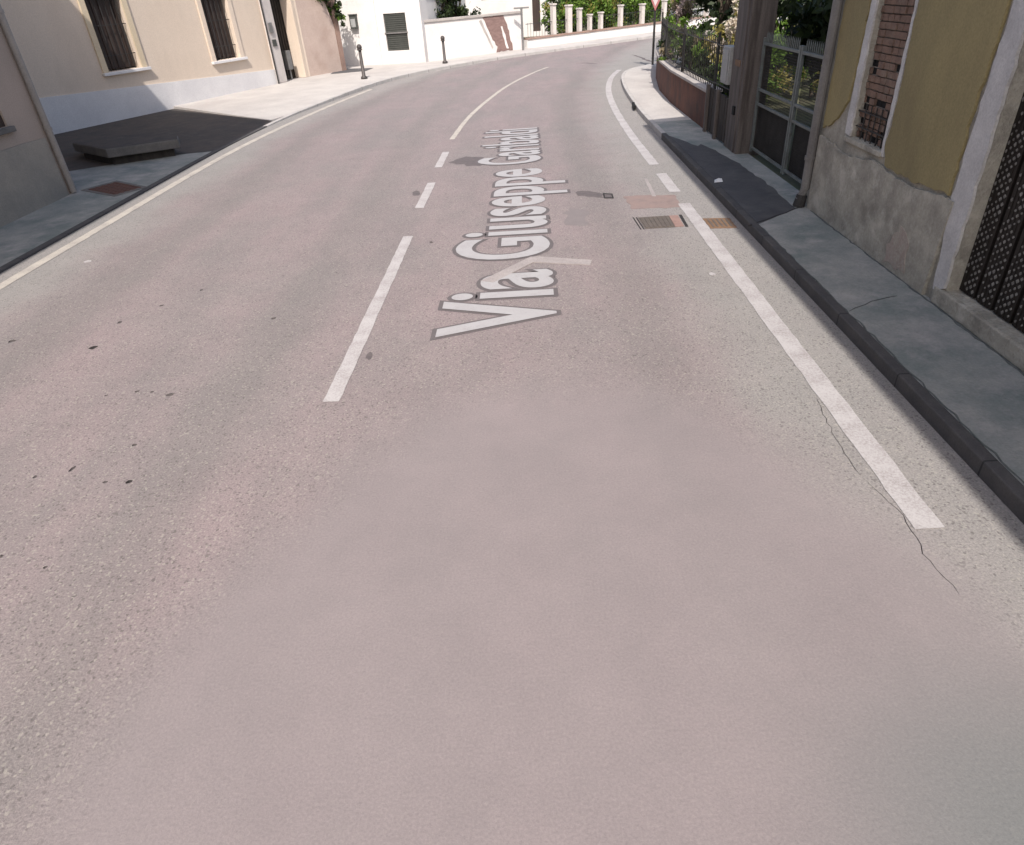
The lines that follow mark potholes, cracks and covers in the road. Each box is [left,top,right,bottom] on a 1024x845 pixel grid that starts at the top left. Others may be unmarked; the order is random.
manhole cover [81,180,147,197]
crack [763,228,1024,594]
drain grate [702,218,737,229]
